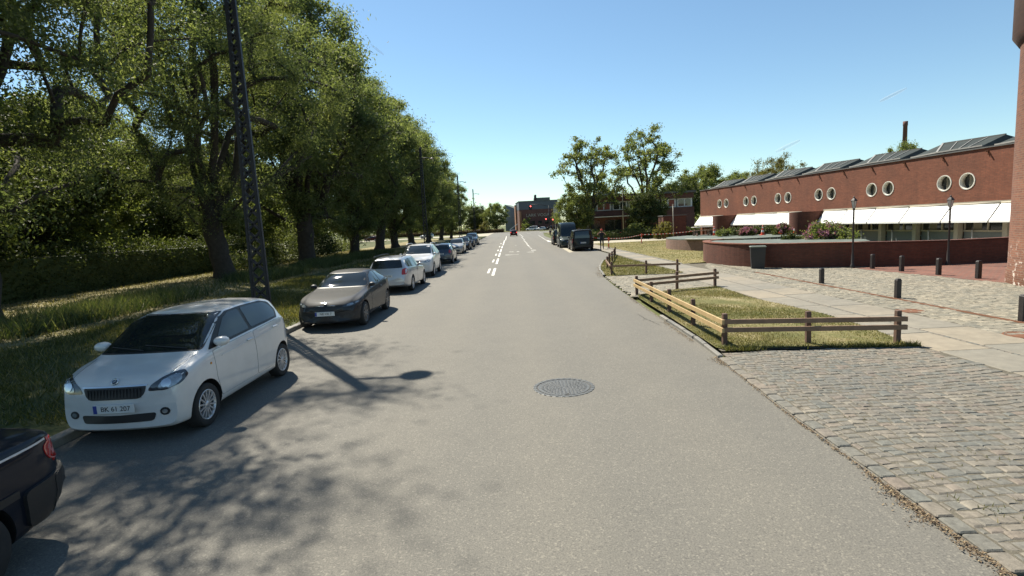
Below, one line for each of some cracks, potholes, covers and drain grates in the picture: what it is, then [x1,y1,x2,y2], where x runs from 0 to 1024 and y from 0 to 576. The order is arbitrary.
manhole cover [533,378,595,397]
